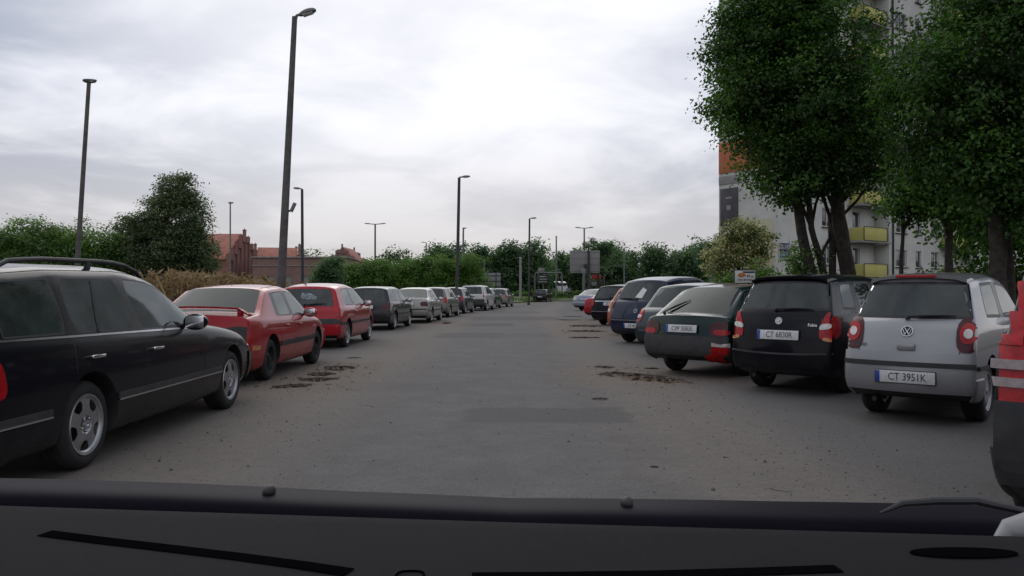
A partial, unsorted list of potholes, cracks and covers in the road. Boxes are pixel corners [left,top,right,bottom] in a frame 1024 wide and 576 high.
pothole [597,371,693,384]
